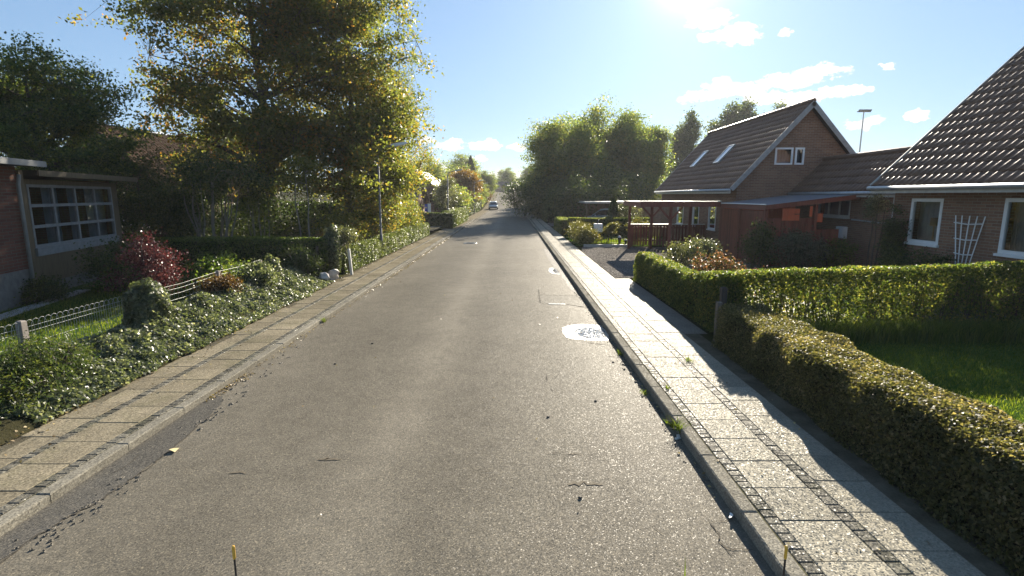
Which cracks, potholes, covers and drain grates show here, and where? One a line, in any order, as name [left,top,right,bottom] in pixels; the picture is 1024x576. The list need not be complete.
crack [709,519,752,556]
